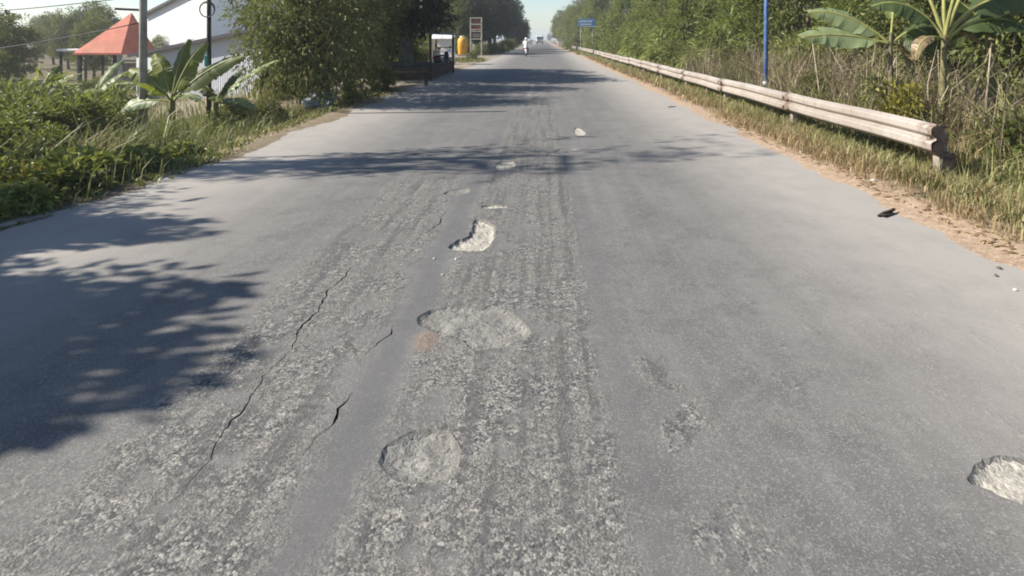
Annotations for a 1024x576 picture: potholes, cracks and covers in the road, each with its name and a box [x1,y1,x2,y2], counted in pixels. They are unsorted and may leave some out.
crack [186,266,352,486]
pothole [967,455,1024,506]
pothole [448,219,496,252]
pothole [494,161,516,169]
pothole [417,305,532,350]
pothole [378,429,461,485]
